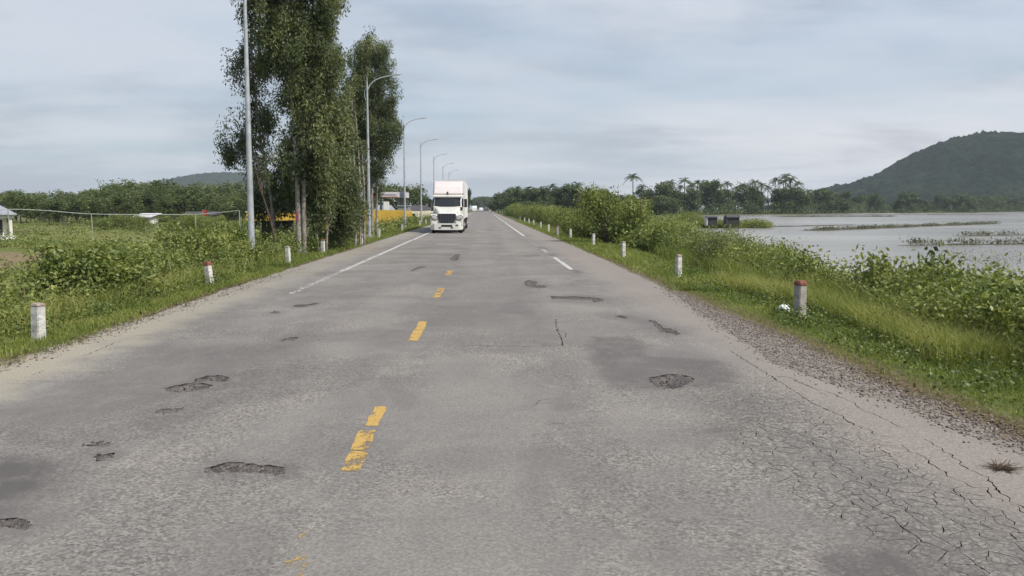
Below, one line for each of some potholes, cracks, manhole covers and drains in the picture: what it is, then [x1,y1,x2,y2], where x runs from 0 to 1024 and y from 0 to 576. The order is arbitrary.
pothole [0,517,33,531]
pothole [649,320,680,335]
pothole [648,374,695,389]
pothole [163,375,230,393]
crack [740,389,1024,576]
crack [730,350,899,437]
pothole [204,462,286,476]
